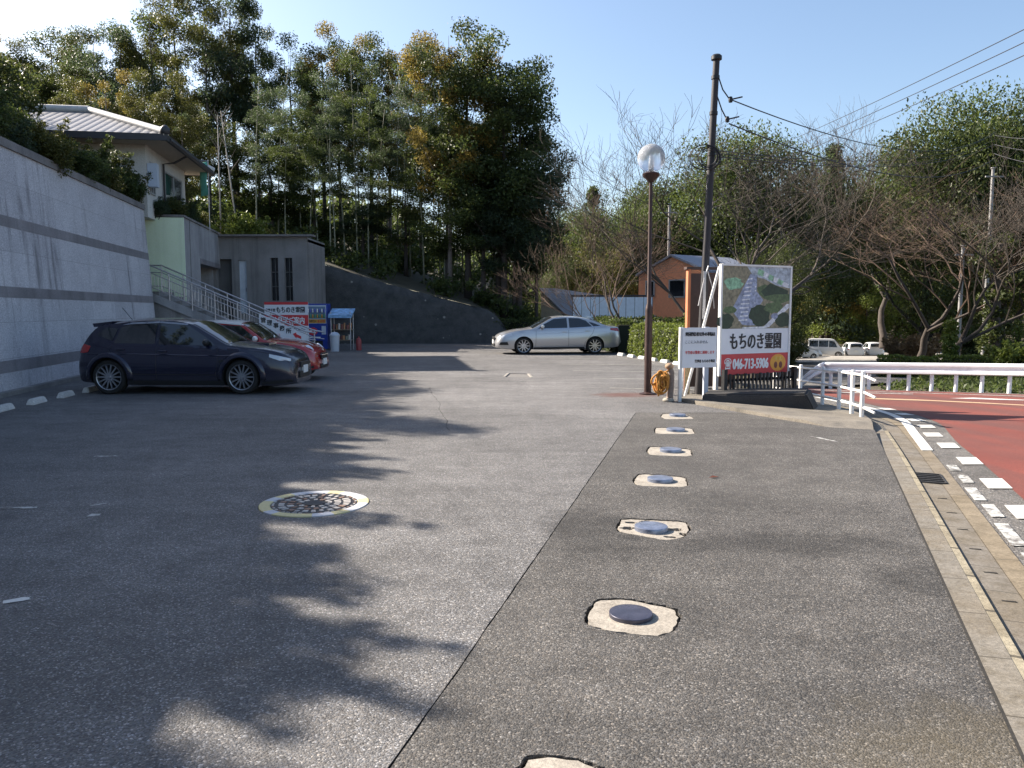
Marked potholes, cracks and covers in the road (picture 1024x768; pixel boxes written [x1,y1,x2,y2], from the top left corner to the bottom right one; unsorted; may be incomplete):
manhole cover [617,519,690,540]
manhole cover [647,447,693,456]
manhole cover [258,491,369,518]
drain grate [914,472,948,484]
manhole cover [585,600,680,636]
manhole cover [633,474,688,487]
manhole cover [523,757,594,768]
